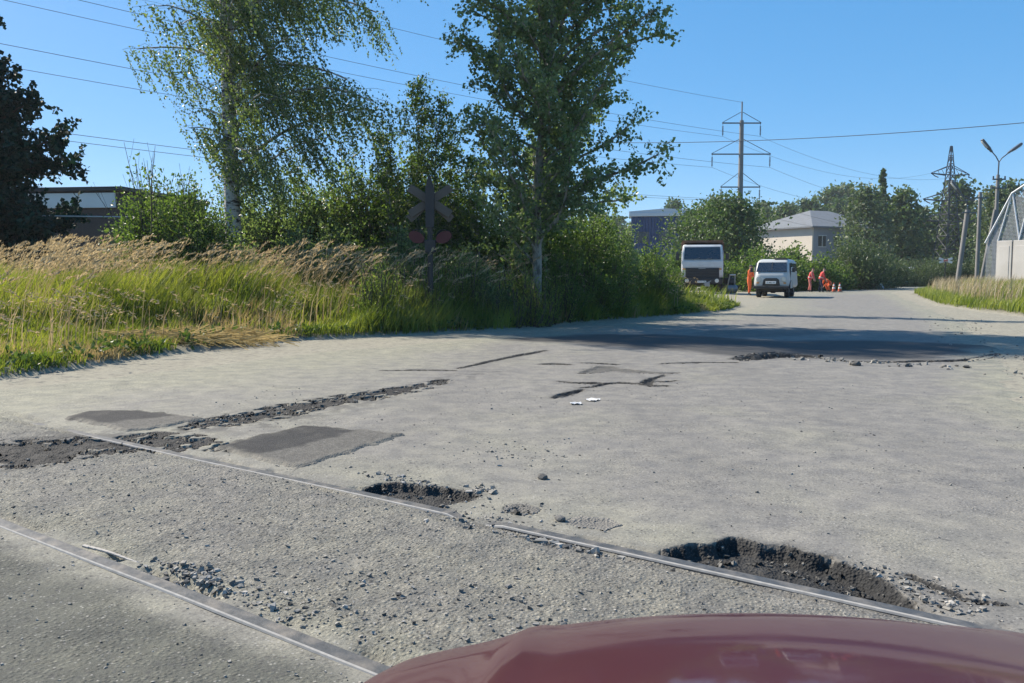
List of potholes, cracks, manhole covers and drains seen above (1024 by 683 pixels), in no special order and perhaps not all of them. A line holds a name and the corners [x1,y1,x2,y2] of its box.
crack [379,350,738,399]
pothole [728,352,823,361]
pothole [364,482,483,509]
pothole [660,536,919,611]
pothole [504,503,541,516]
